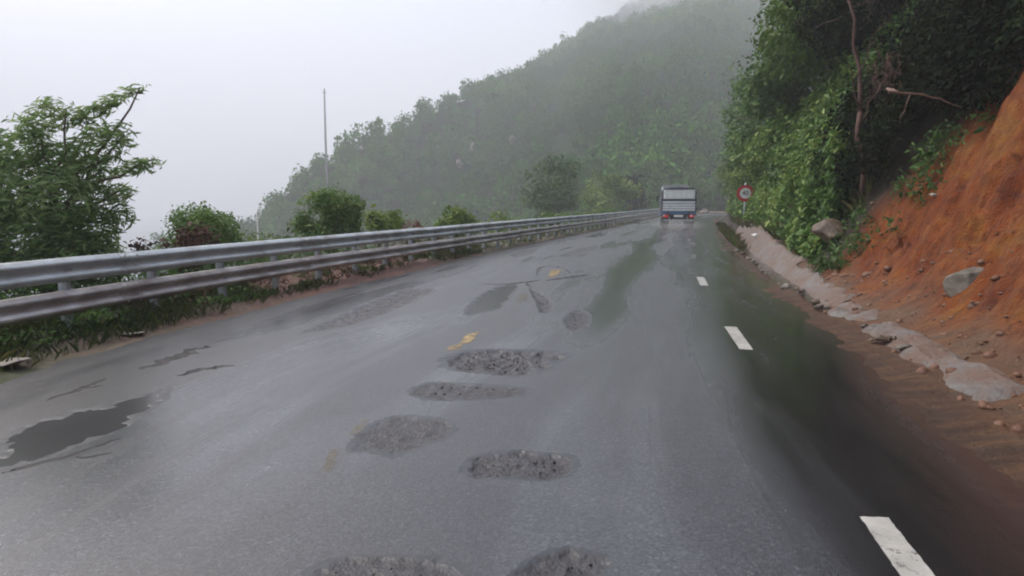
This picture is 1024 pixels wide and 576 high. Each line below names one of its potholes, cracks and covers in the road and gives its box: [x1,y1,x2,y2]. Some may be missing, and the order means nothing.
pothole [406,381,535,402]
pothole [507,545,614,576]
pothole [436,348,574,377]
pothole [562,310,592,331]
crack [493,274,590,288]
pothole [458,449,582,482]
pothole [301,554,468,576]
pothole [345,414,460,460]
